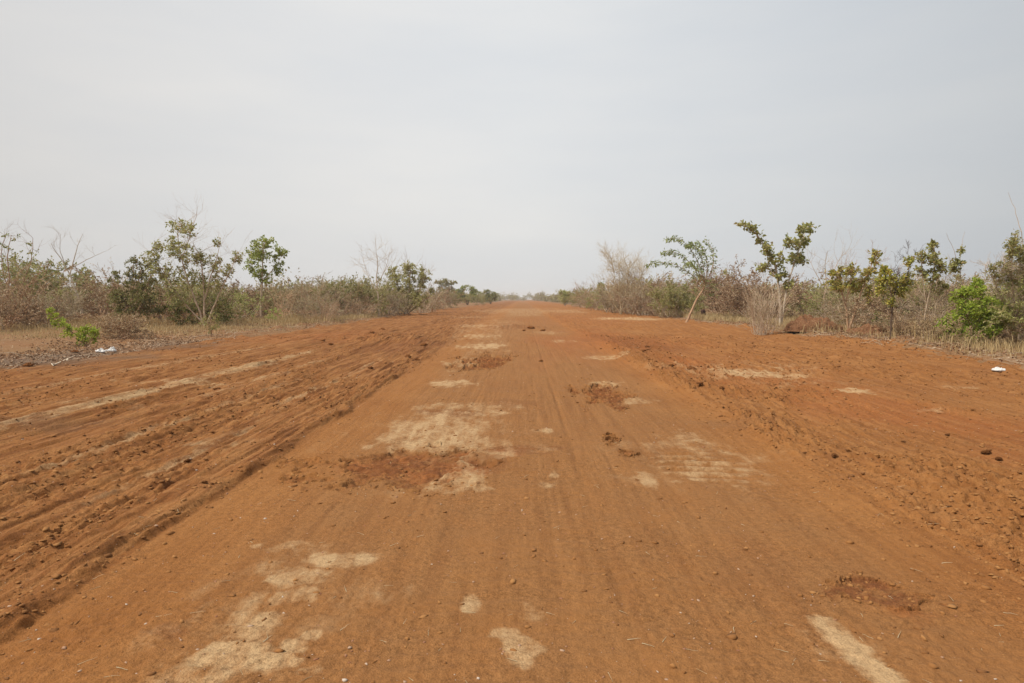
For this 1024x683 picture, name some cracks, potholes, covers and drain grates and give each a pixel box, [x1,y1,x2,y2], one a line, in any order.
pothole [564,378,638,413]
pothole [601,432,627,446]
pothole [806,570,951,611]
pothole [268,441,505,496]
pothole [617,449,640,458]
pothole [445,349,521,374]
